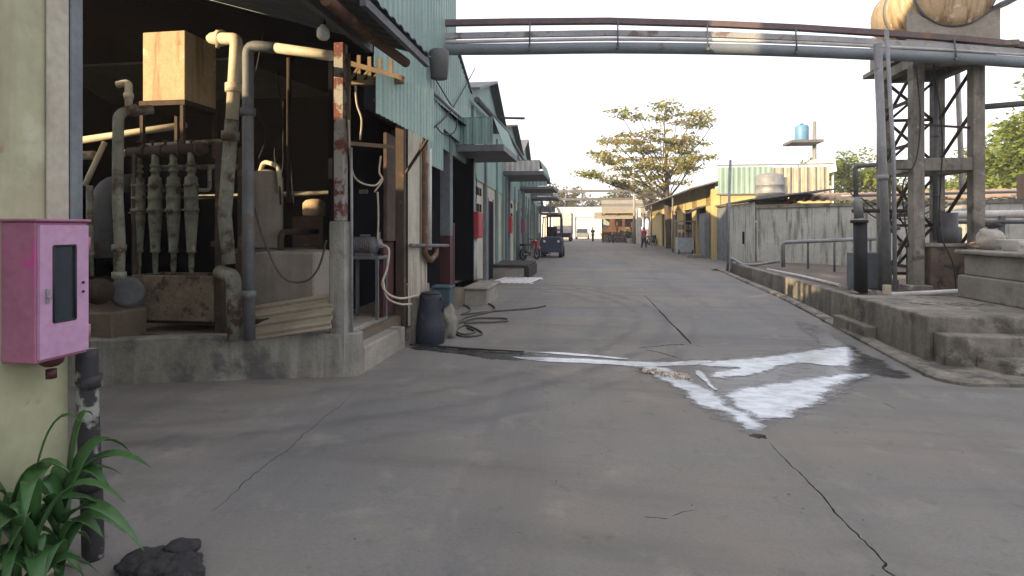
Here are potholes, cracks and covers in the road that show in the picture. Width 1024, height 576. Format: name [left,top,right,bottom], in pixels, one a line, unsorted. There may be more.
crack [212,397,350,511]
